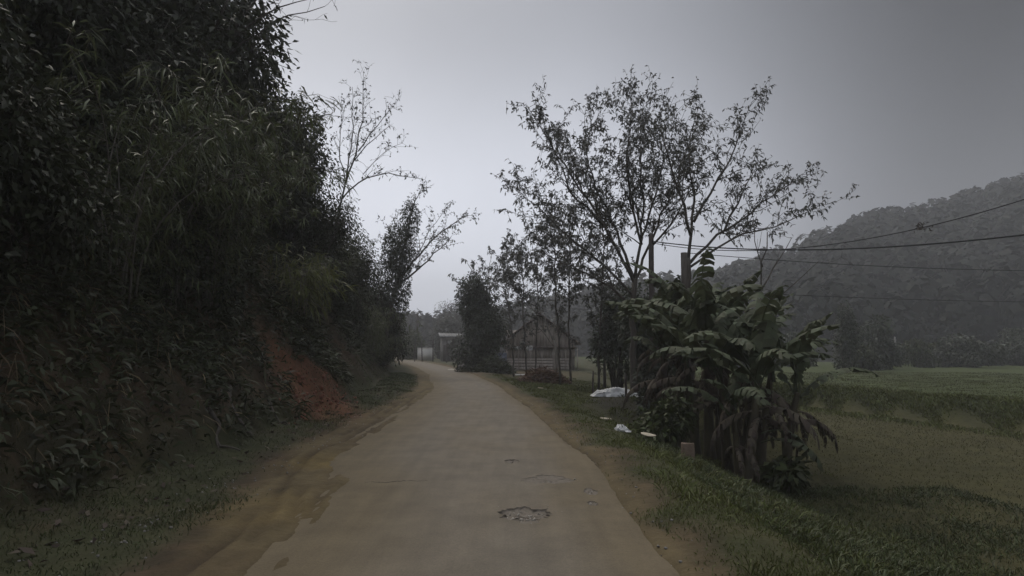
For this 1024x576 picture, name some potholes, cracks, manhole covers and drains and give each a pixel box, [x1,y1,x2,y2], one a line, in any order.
pothole [498,506,553,524]
pothole [520,475,576,484]
